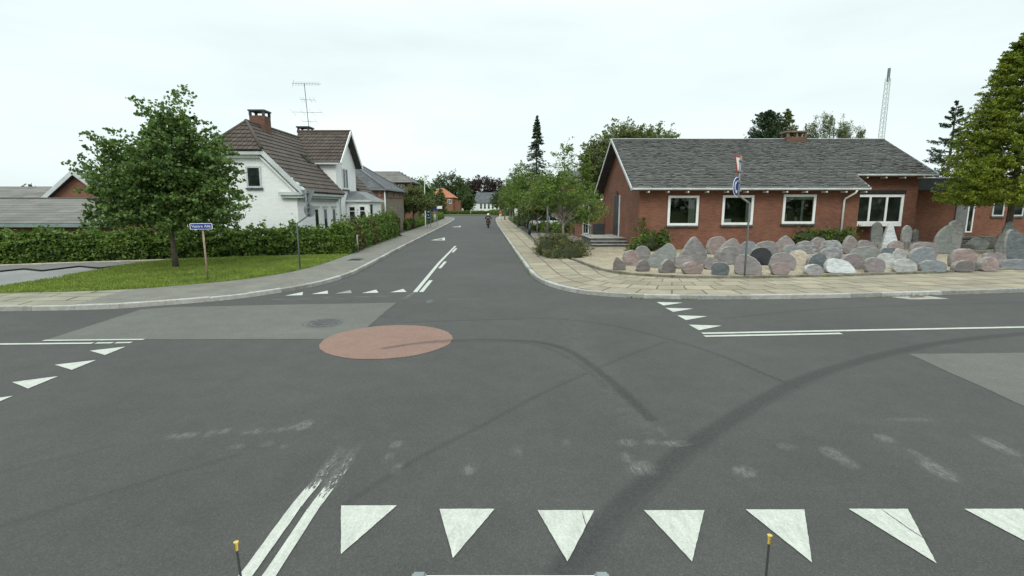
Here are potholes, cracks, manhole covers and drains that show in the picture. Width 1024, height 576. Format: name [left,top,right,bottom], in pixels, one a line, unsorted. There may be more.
manhole cover [302,318,347,328]
